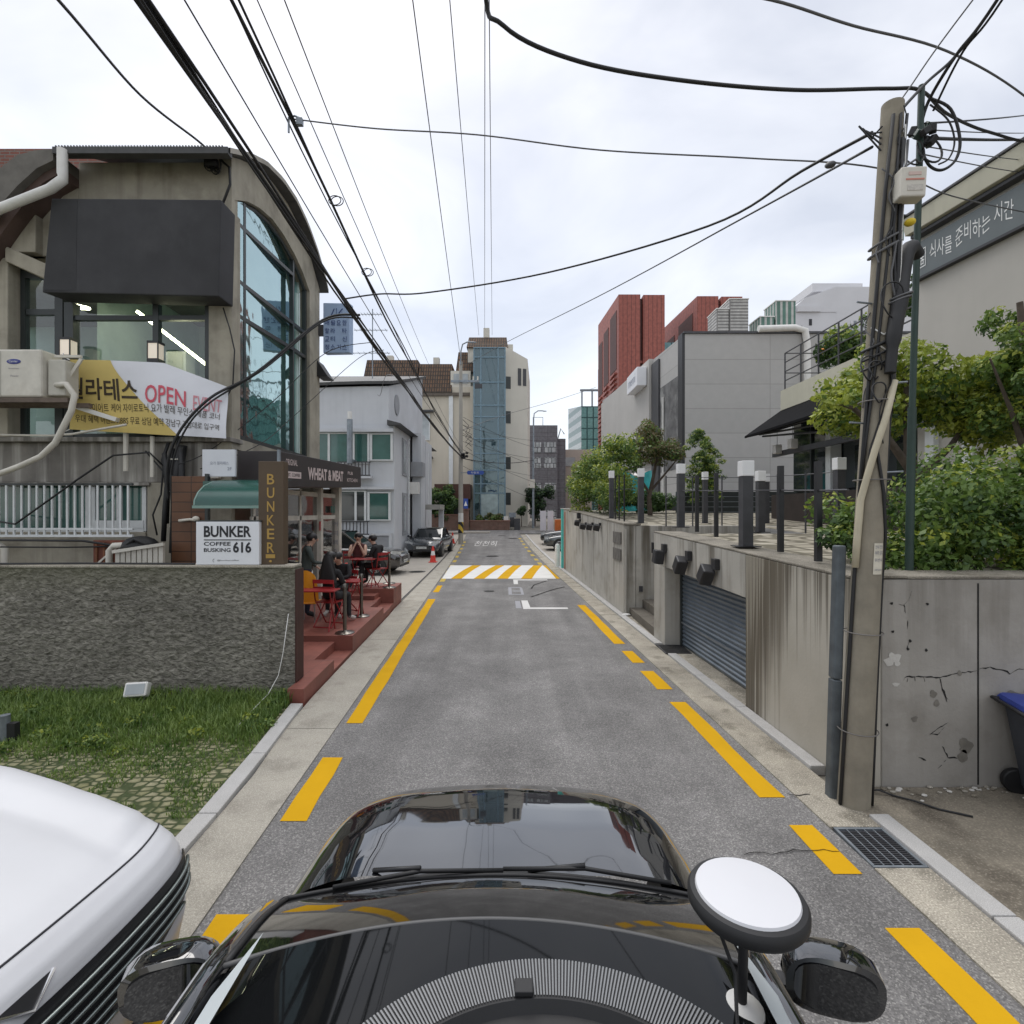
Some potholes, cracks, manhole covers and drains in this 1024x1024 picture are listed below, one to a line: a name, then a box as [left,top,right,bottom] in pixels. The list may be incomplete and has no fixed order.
drain grate [833,827,929,869]
